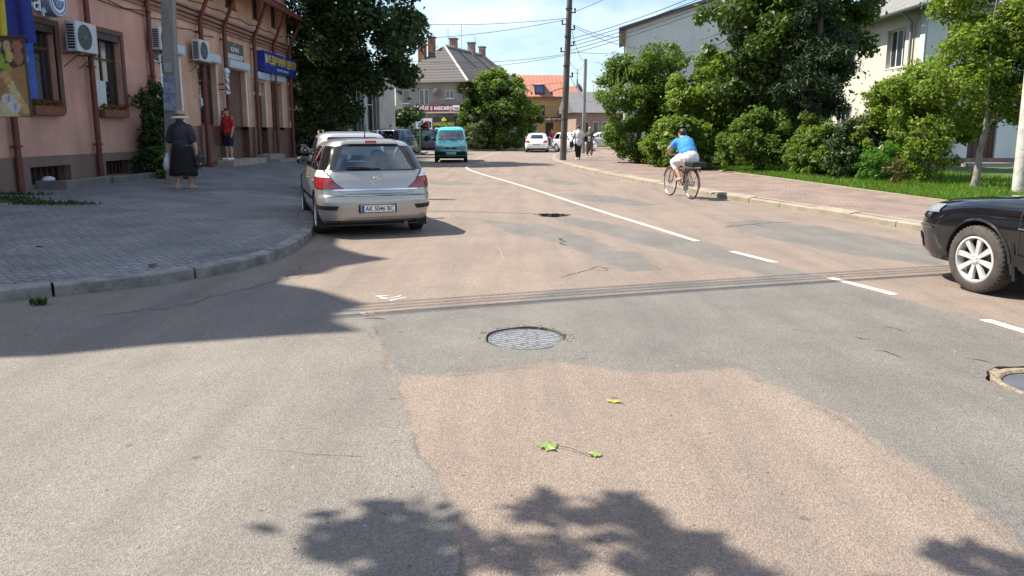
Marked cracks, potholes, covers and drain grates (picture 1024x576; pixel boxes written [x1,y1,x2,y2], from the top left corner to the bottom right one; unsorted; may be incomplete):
manhole cover [987,368,1024,395]
crack [91,266,306,318]
manhole cover [479,325,574,350]
